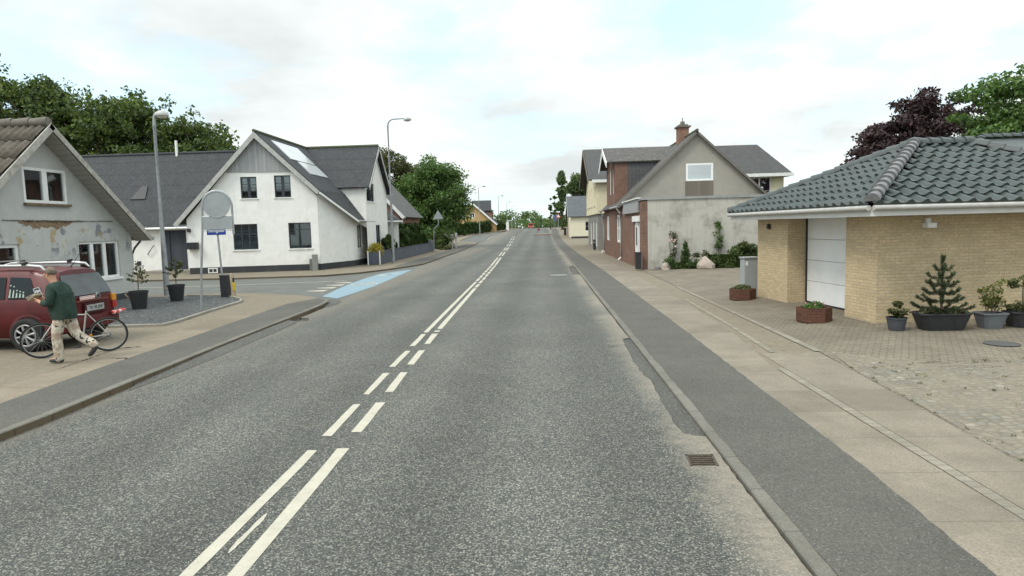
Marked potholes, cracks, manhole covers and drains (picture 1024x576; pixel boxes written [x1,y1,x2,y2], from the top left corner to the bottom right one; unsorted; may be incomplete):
drain grate [685,454,719,466]
